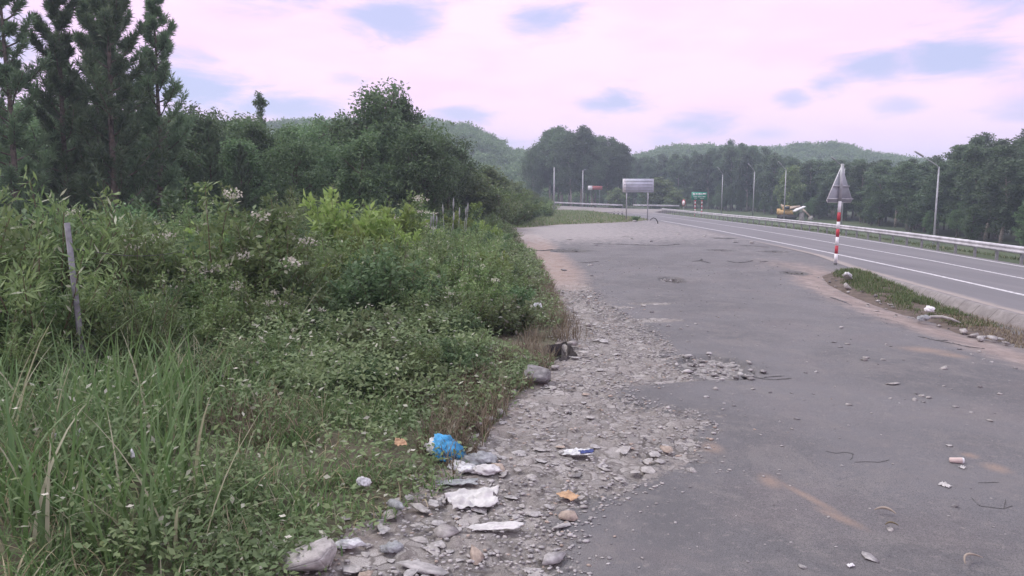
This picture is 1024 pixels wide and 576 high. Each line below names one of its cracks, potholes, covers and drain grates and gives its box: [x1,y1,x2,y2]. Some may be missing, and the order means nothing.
pothole [665,352,767,385]
pothole [657,276,686,284]
